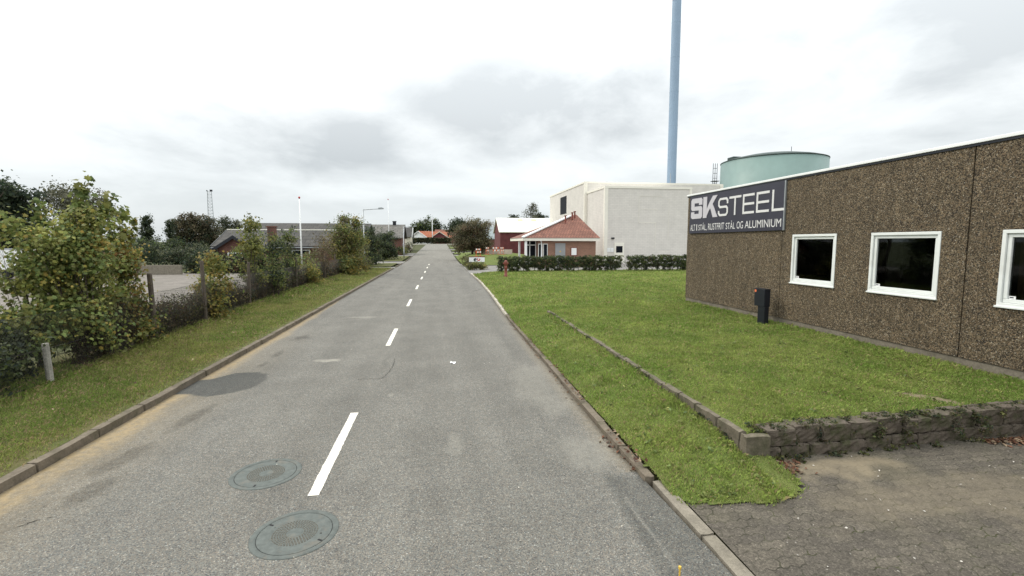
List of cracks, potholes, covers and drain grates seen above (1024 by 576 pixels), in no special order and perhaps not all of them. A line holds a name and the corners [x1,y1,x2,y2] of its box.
manhole cover [228,458,302,490]
manhole cover [248,510,339,560]
